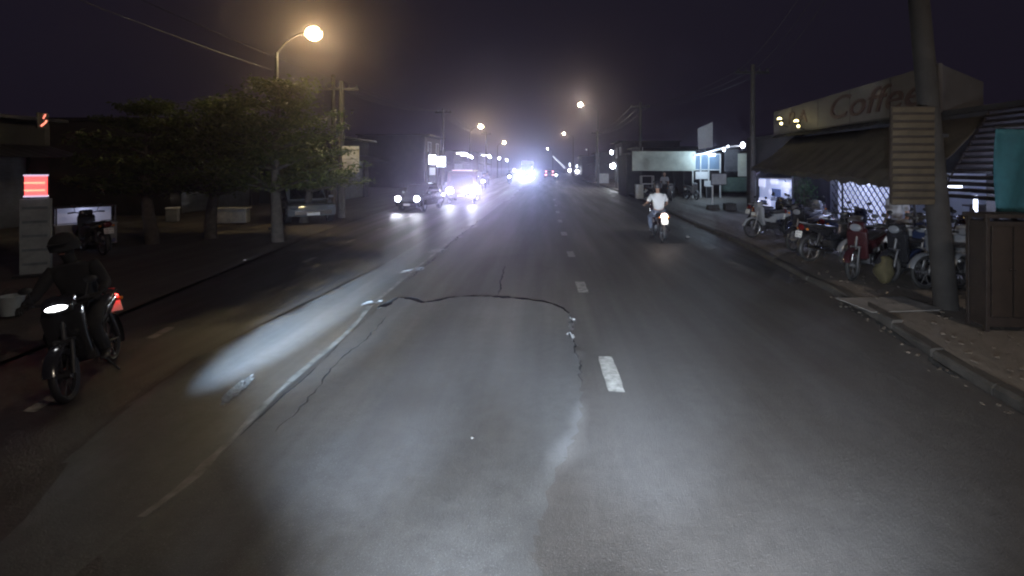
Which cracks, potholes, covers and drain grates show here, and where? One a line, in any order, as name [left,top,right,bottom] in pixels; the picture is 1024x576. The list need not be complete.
crack [240,219,583,436]
